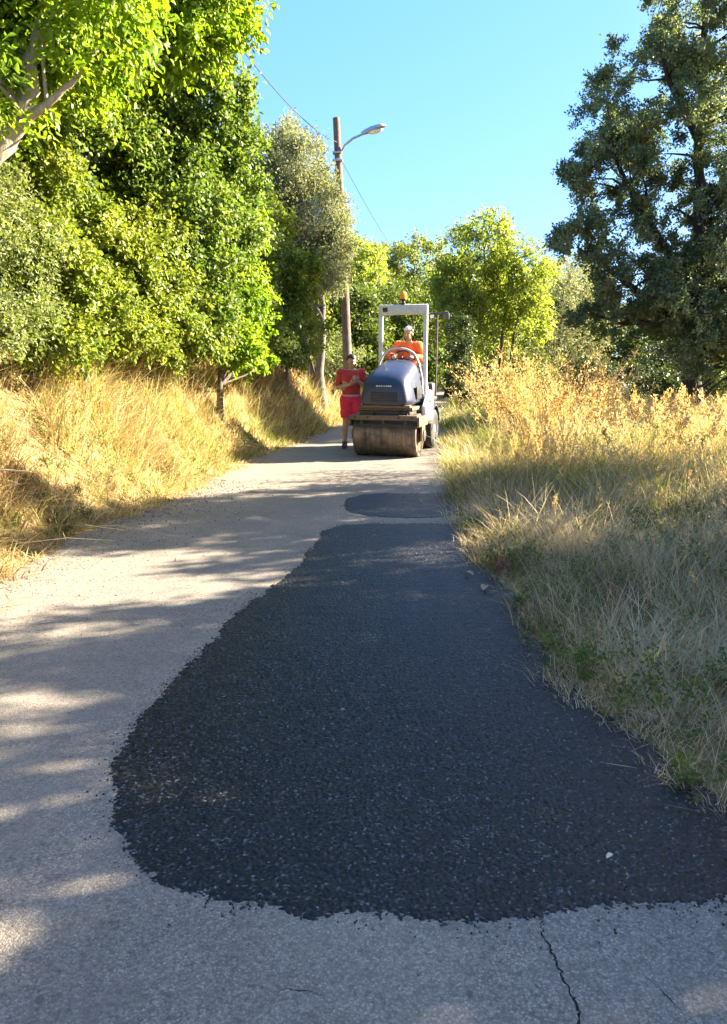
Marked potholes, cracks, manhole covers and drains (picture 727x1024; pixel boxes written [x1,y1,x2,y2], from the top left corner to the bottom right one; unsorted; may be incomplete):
crack [539,921,581,1024]
